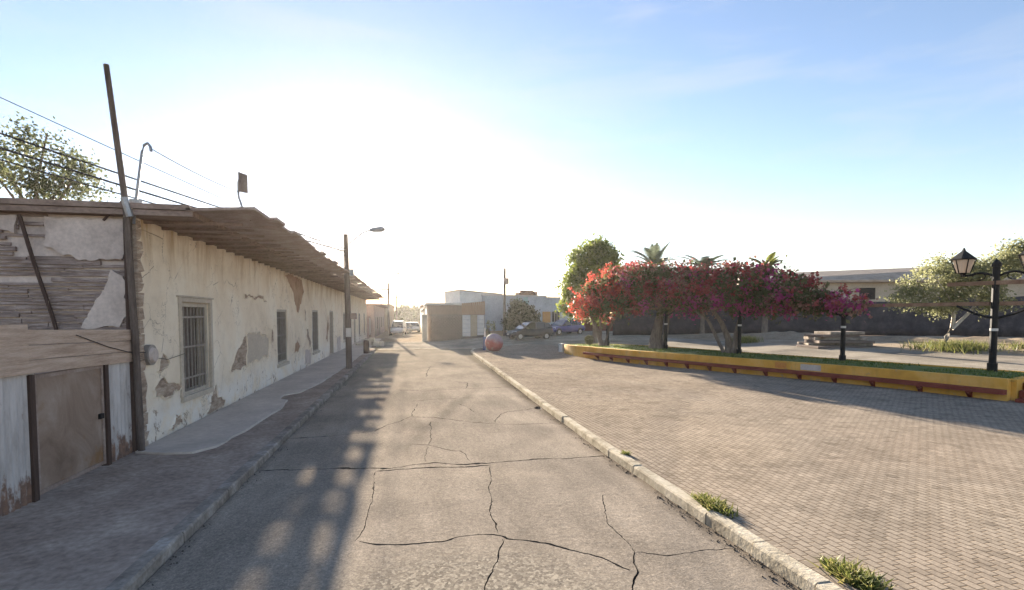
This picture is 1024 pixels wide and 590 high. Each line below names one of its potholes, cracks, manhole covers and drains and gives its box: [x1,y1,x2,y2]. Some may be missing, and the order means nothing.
crack [262,366,734,590]
